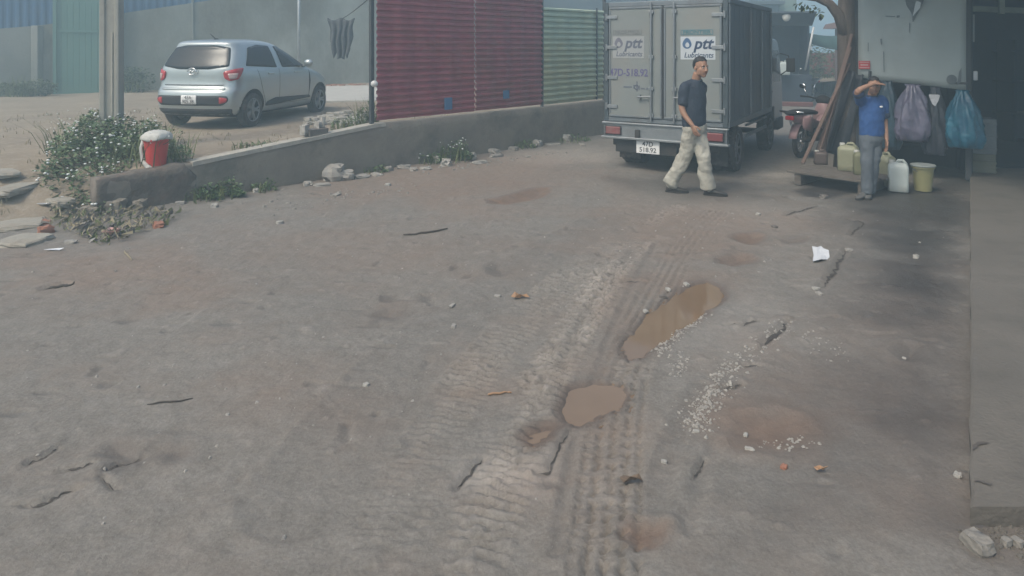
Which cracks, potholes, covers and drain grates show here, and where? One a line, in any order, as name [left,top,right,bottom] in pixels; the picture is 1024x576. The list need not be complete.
crack [457,461,482,489]
pothole [551,377,635,431]
crack [29,449,142,491]
crack [539,431,569,475]
pothole [616,278,733,363]
crack [30,491,72,508]
pothole [512,416,575,453]
crack [734,320,786,346]
crack [821,221,864,288]
